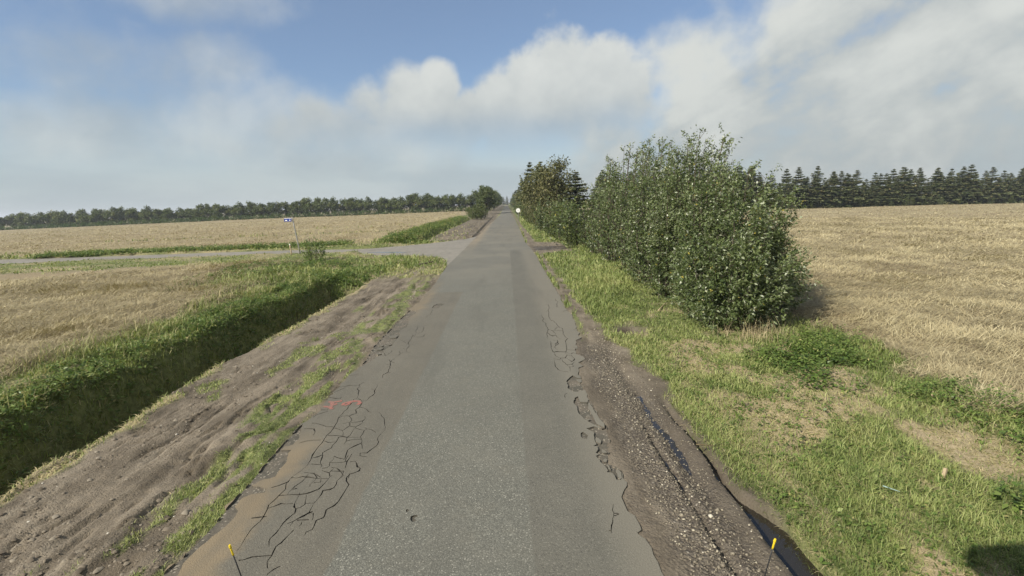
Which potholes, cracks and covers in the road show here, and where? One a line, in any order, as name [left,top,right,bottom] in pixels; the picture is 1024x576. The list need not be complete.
crack [541,301,576,372]
pothole [566,375,583,392]
crack [239,311,432,575]
